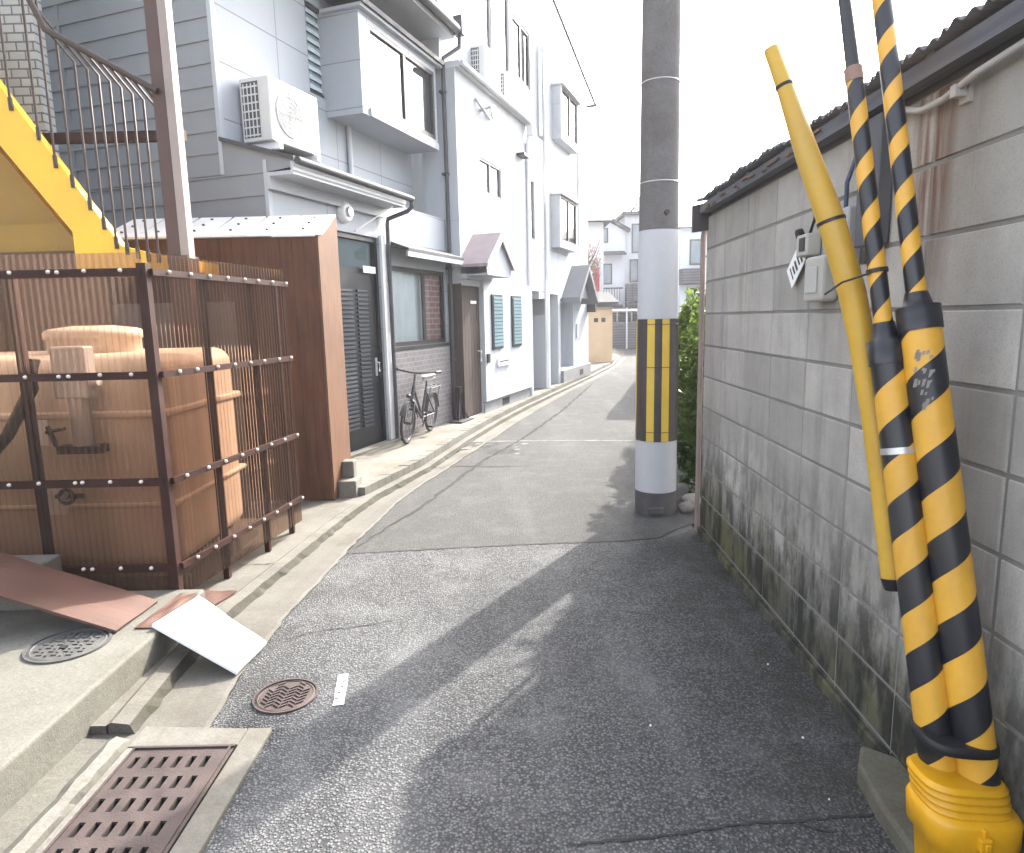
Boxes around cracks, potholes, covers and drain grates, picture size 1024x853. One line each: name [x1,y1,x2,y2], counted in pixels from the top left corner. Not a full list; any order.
crack [270,620,394,641]
manhole cover [252,678,319,715]
crack [565,813,874,846]
manhole cover [22,626,112,664]
crack [441,442,529,468]
drain grate [34,727,272,853]
